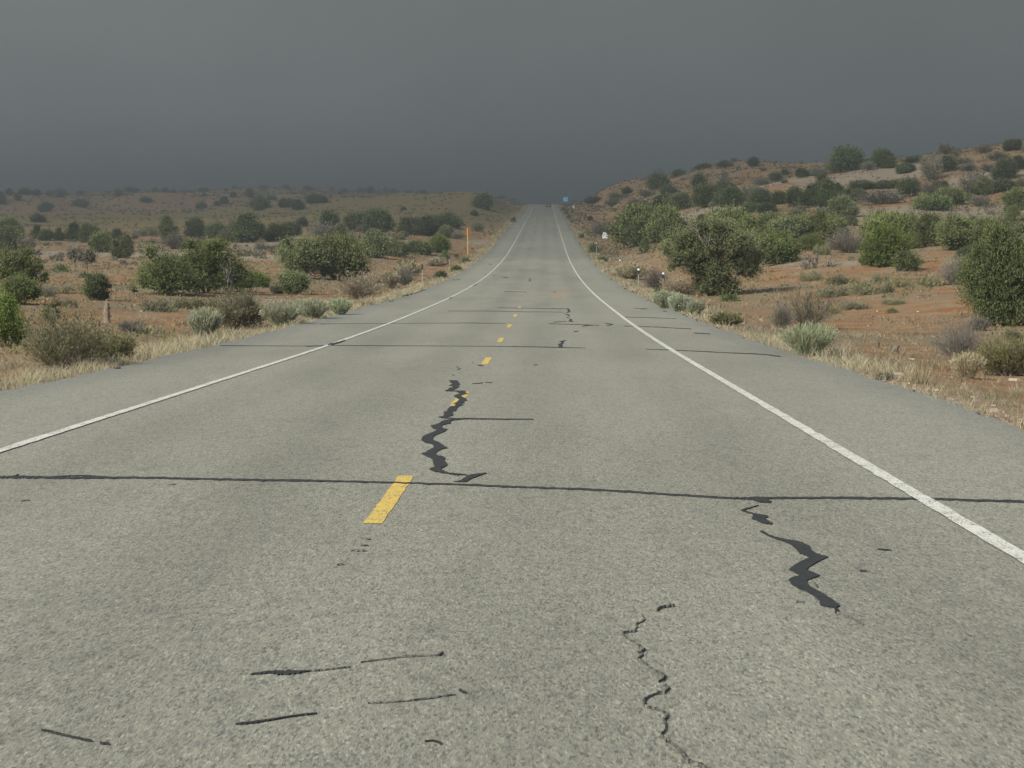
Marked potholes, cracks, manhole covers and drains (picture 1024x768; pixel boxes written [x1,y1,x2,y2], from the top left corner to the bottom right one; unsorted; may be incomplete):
crack [251,650,443,675]
crack [236,688,466,725]
crack [41,729,109,745]
crack [219,264,781,365]
crack [622,604,707,768]
